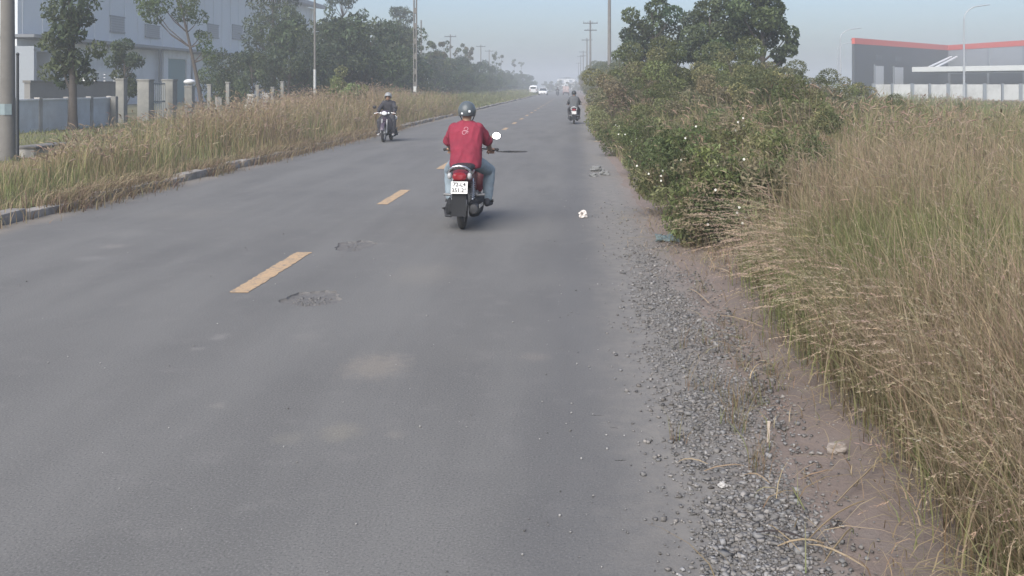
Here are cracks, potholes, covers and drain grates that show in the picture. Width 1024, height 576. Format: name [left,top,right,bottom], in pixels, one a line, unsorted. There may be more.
pothole [334,240,379,252]
pothole [278,290,343,307]
